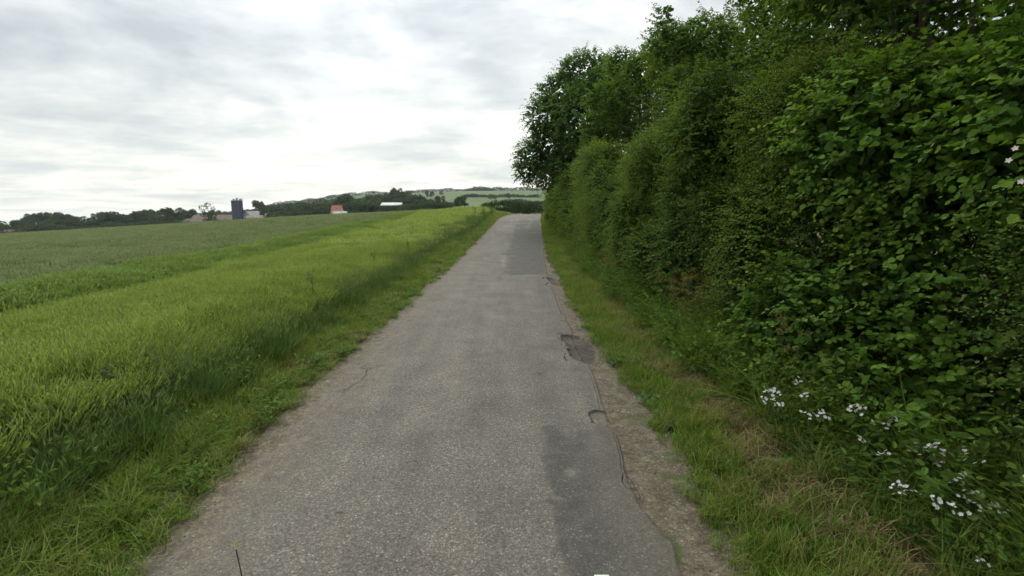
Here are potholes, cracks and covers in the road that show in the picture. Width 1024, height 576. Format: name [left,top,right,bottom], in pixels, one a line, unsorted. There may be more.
pothole [584,409,616,428]
crack [339,367,369,394]
pothole [556,333,600,365]
